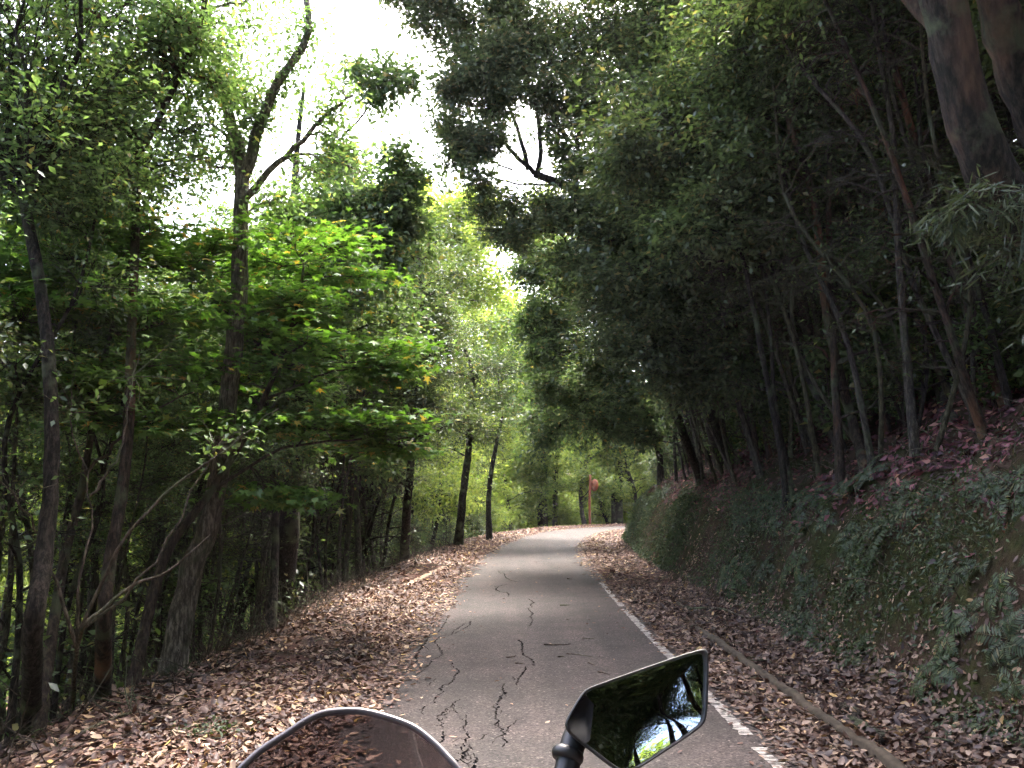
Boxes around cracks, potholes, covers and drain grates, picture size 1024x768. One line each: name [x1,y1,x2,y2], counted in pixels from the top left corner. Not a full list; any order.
crack [414,599,535,768]
